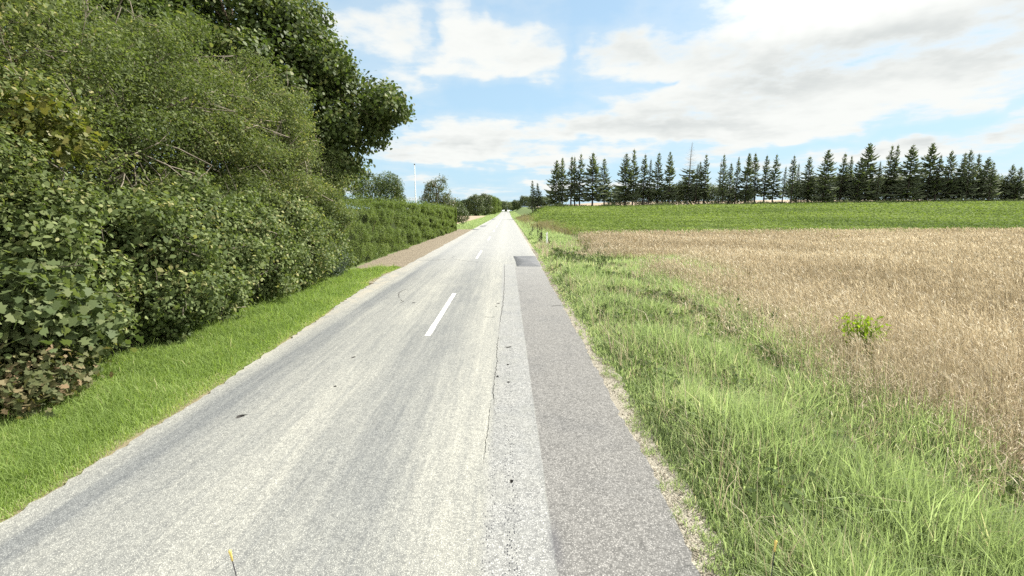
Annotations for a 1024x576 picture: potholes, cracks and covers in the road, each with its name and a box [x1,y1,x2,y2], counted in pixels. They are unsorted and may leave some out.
crack [483,265,505,462]
